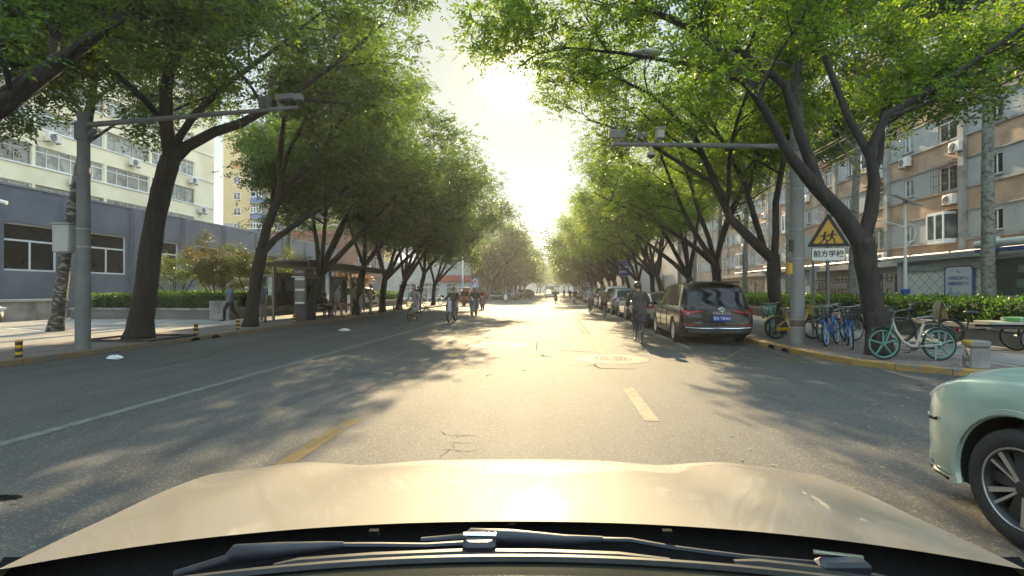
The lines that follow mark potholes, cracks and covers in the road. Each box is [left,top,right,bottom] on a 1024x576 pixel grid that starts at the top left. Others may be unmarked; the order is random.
manhole cover [573,354,649,364]
